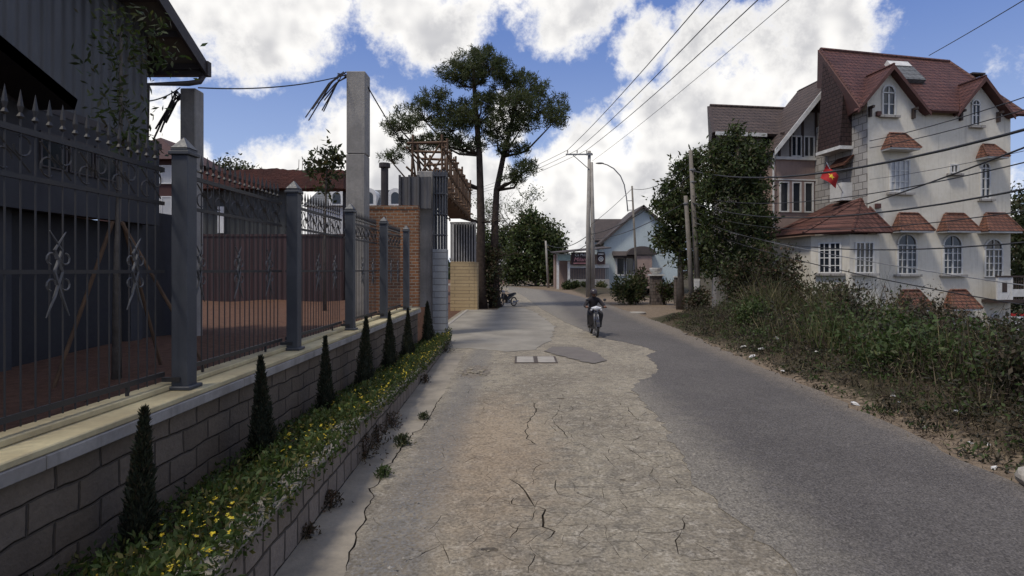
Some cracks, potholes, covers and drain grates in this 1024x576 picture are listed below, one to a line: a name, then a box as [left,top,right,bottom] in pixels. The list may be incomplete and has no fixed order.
crack [346,397,442,571]
crack [413,375,723,571]
